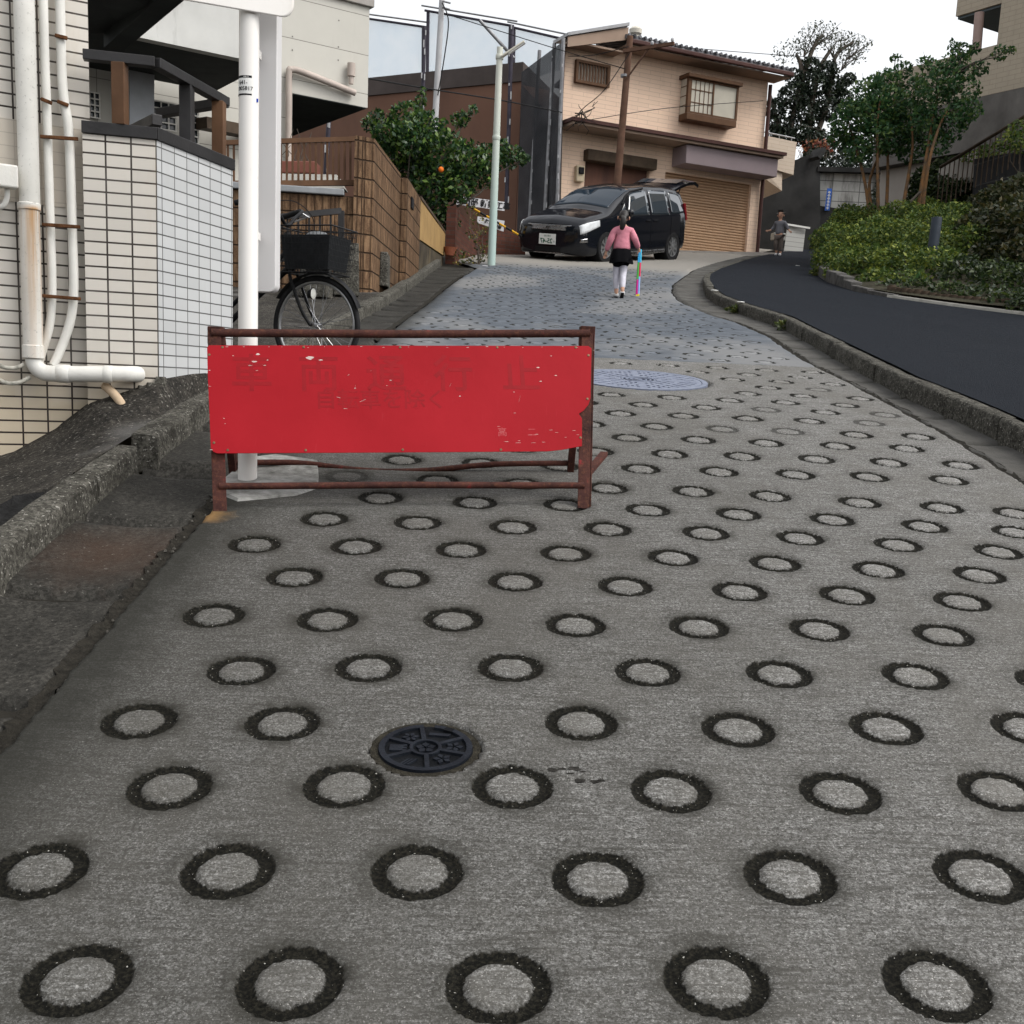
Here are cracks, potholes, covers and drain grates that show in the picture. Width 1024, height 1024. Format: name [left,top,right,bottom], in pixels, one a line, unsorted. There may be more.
manhole cover [370,723,481,777]
pothole [547,766,605,784]
manhole cover [594,369,708,391]
